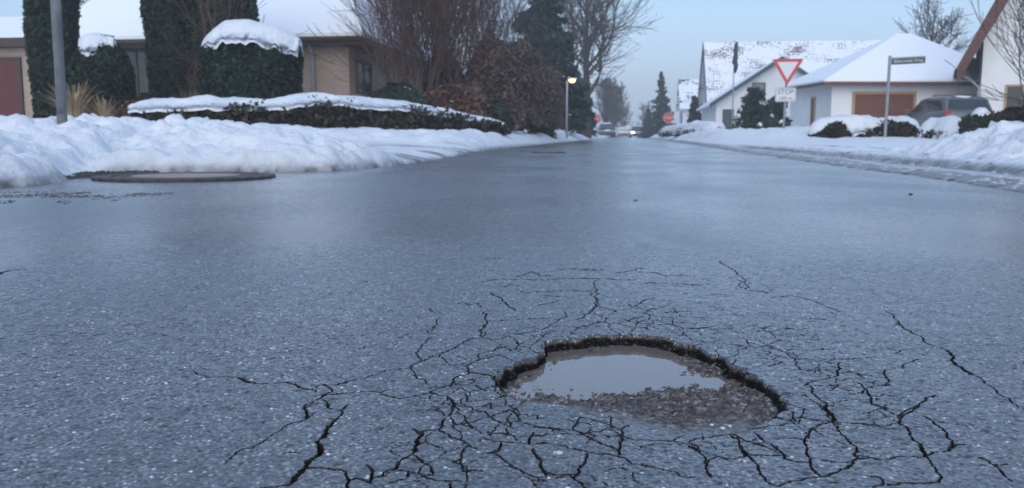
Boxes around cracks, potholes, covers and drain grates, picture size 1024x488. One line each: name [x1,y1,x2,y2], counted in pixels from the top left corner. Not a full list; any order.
manhole cover [91,172,276,183]
pothole [492,335,789,435]
crack [978,457,1012,482]
crack [180,268,967,488]
crack [885,311,1024,410]
crack [719,261,749,290]
